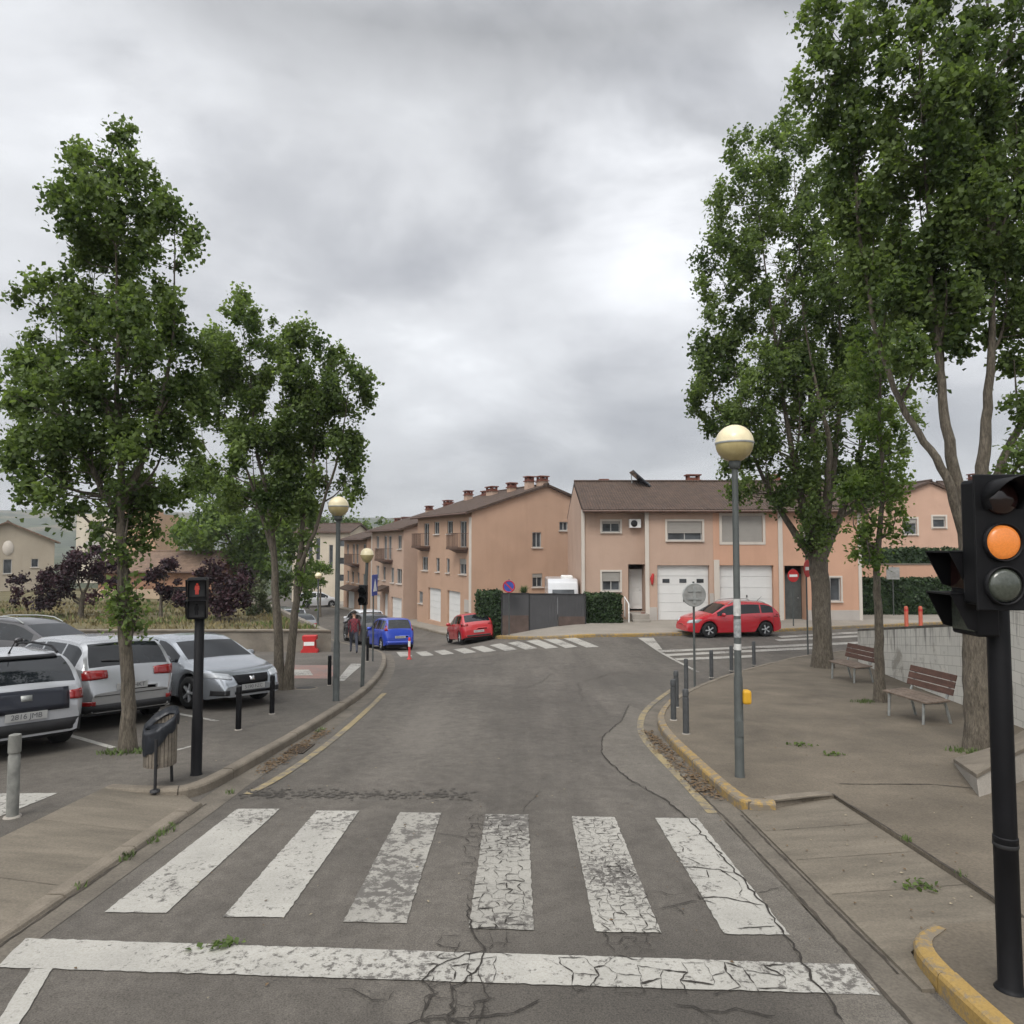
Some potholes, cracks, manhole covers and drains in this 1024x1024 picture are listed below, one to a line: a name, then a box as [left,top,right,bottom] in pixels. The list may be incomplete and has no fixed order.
crack [408,815,539,1024]
crack [338,988,393,1000]
crack [559,706,843,1022]
